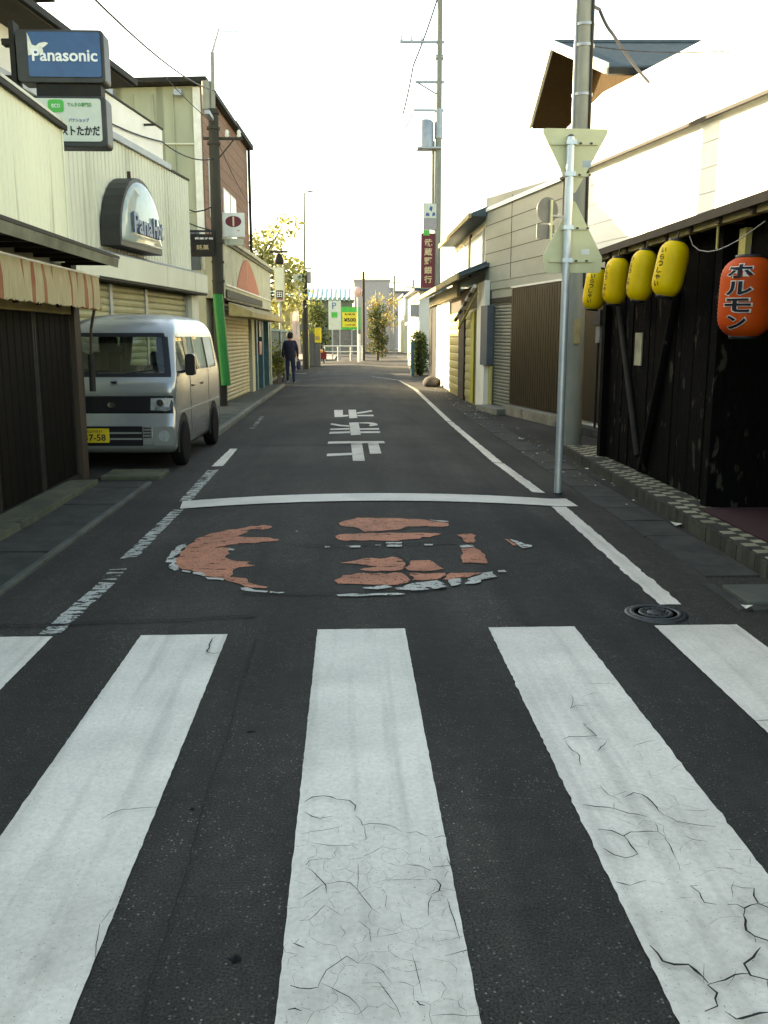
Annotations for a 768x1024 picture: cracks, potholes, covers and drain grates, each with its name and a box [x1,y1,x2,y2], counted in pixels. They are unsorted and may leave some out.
manhole cover [624,604,688,624]
crack [75,914,108,988]
crack [618,849,768,1020]
crack [564,683,751,872]
crack [283,796,477,1024]
